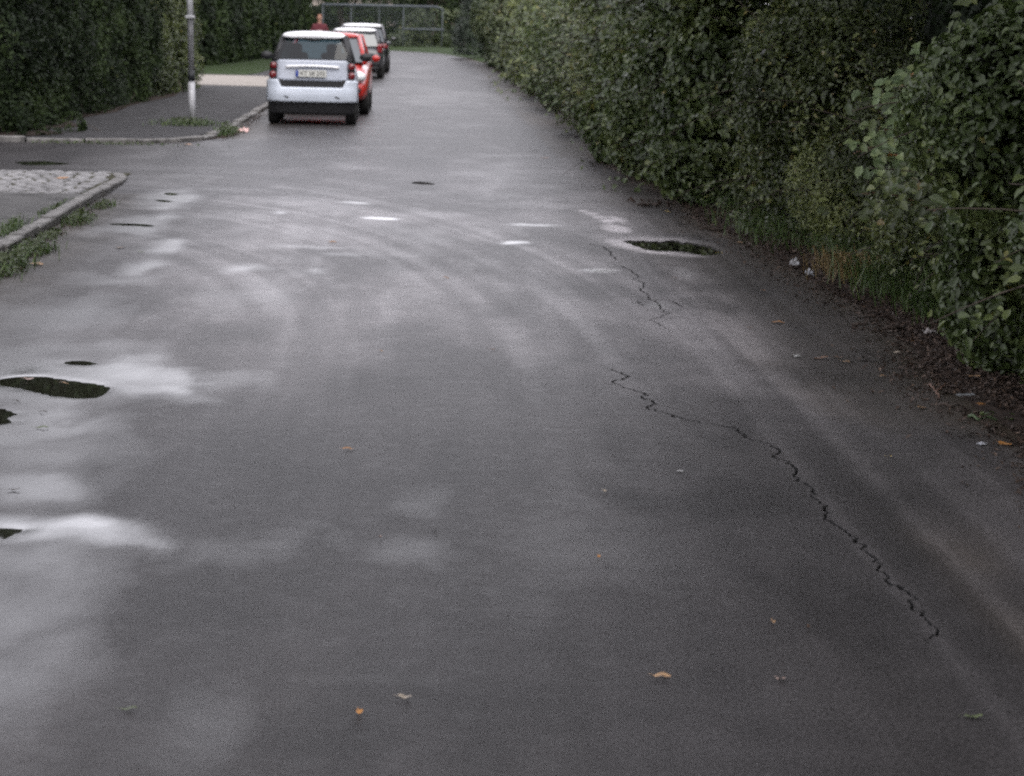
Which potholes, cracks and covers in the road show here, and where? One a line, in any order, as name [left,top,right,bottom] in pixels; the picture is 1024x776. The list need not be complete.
crack [589,243,683,330]
crack [605,368,939,646]
pothole [623,240,724,256]
